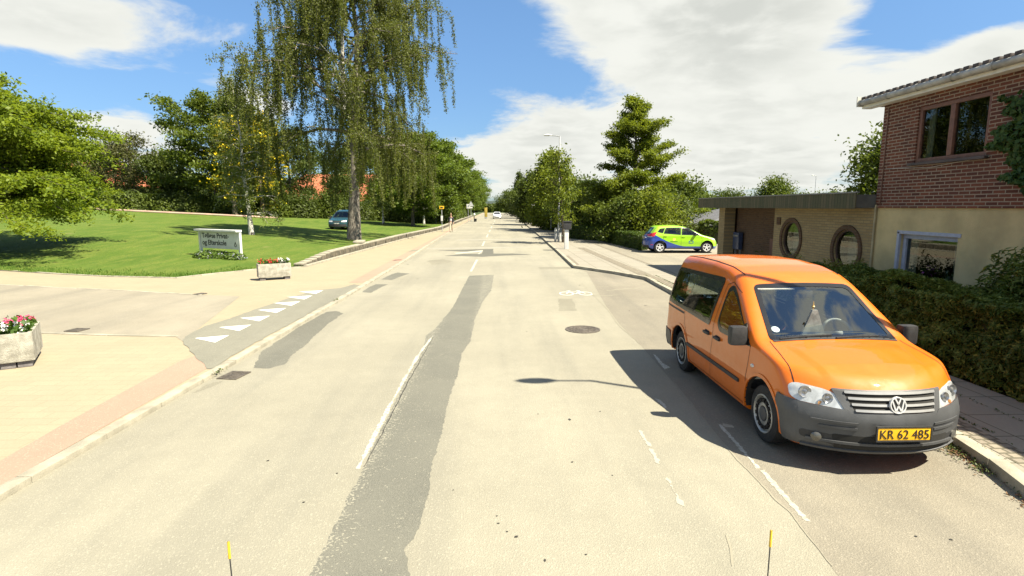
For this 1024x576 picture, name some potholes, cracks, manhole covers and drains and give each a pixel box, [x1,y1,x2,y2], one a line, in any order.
drain grate [216,371,251,380]
manhole cover [565,325,600,334]
